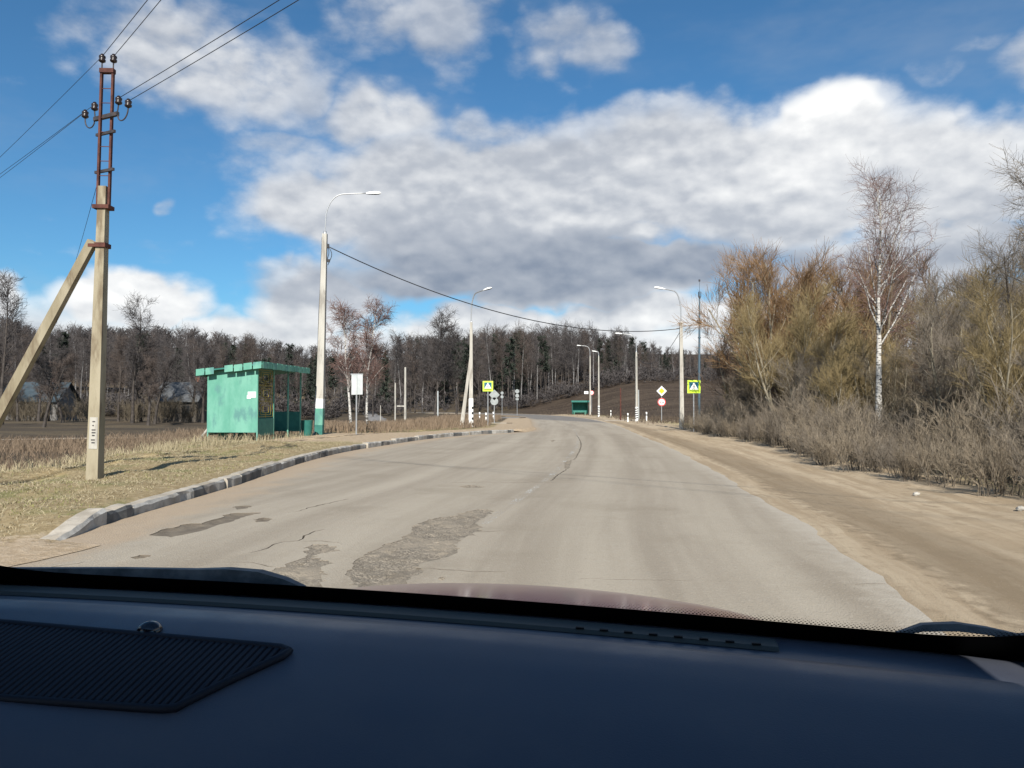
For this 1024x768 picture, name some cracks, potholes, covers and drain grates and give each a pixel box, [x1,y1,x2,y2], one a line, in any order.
crack [250,529,342,567]
